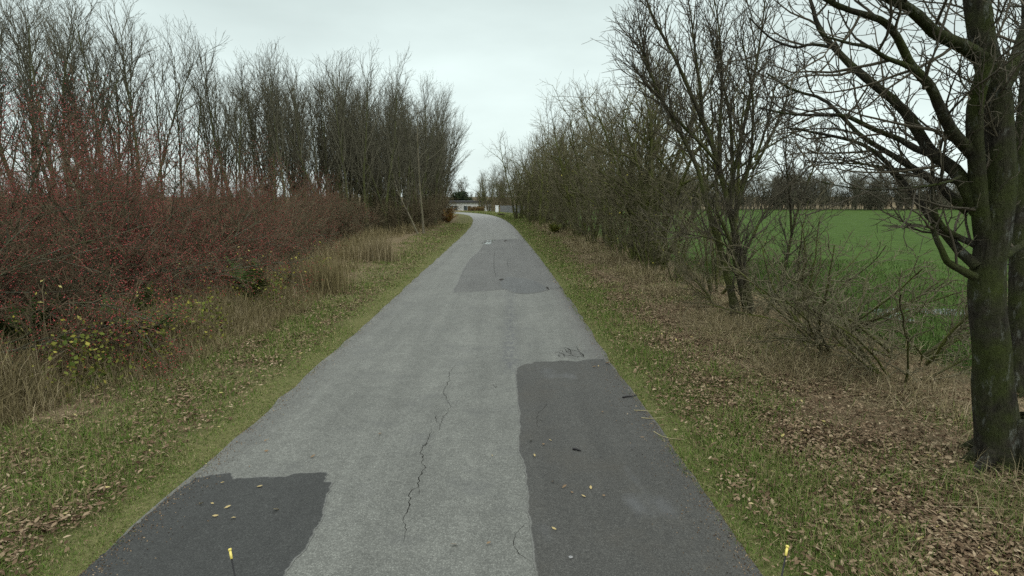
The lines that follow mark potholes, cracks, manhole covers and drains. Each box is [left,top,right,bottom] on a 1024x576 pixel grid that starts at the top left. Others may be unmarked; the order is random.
crack [403,366,455,542]
